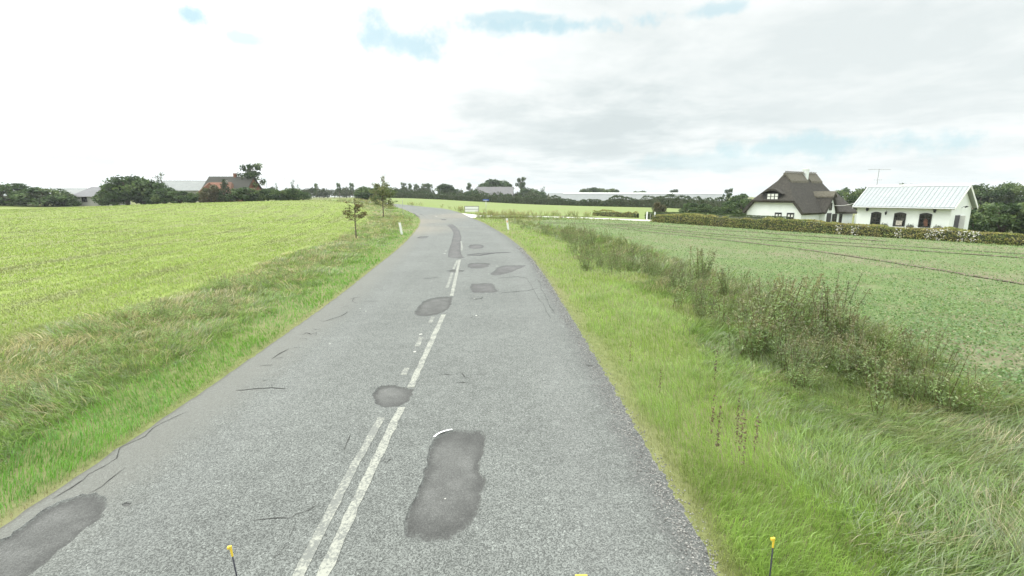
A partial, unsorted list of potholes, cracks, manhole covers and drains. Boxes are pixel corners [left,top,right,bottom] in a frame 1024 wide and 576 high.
crack [256,504,318,562]
crack [54,413,183,498]
